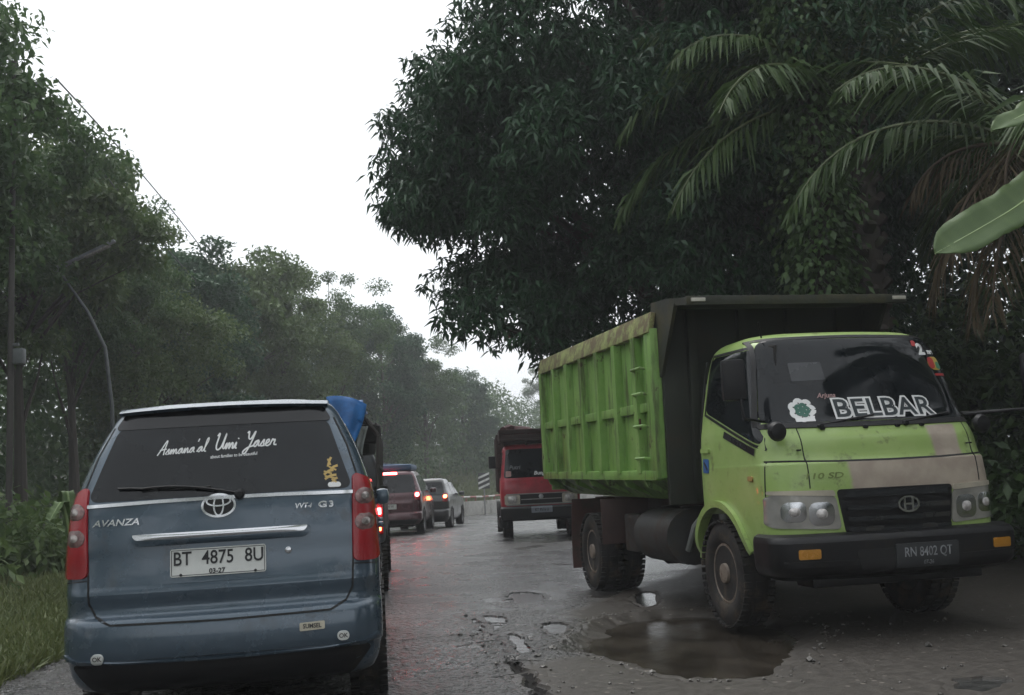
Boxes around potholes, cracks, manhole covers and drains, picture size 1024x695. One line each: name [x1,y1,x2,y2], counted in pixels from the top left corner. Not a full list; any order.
pothole [491,632,536,655]
pothole [465,614,516,633]
pothole [499,591,551,605]
pothole [532,621,575,635]
pothole [629,591,664,608]
pothole [546,607,830,683]
pothole [938,674,1024,695]
